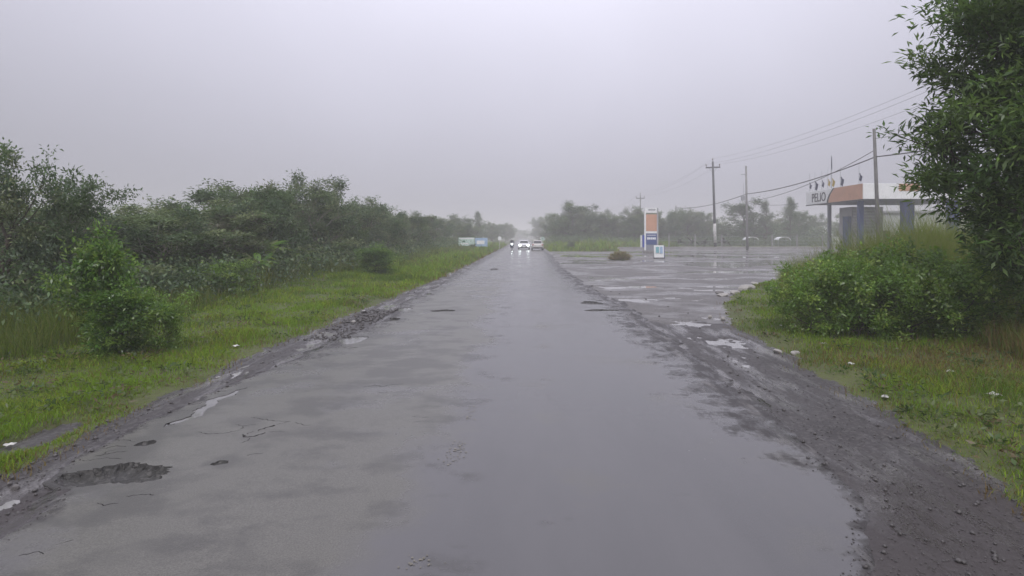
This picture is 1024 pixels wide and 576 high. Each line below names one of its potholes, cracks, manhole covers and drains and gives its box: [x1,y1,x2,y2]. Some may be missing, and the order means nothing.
pothole [54,462,172,487]
crack [201,417,303,456]
